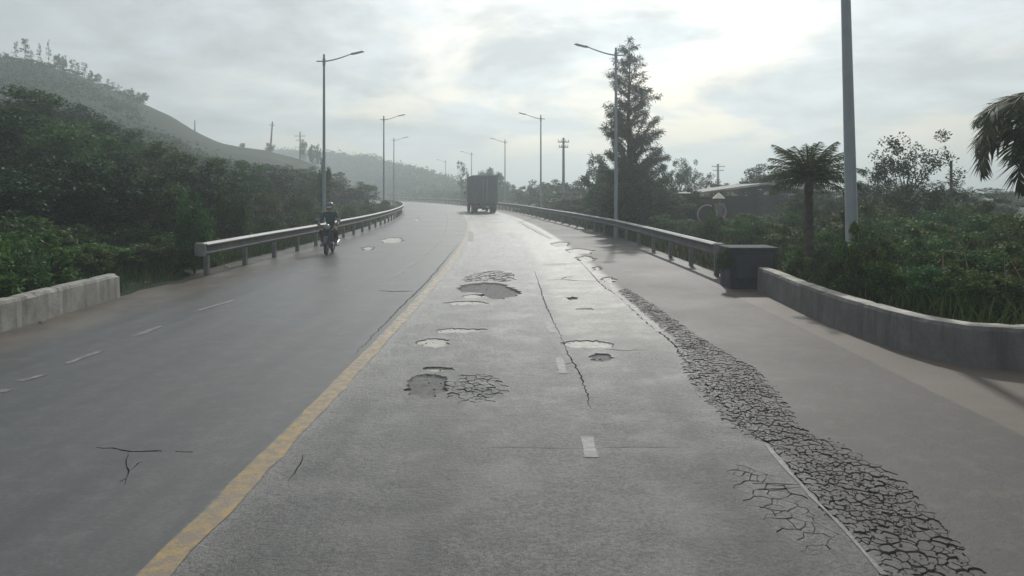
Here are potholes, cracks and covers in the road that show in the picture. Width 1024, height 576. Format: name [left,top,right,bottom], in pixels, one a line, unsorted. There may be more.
crack [96,447,183,483]
crack [463,271,517,282]
crack [554,259,986,576]
pothole [457,282,522,299]
pothole [415,338,449,348]
pothole [403,374,450,398]
pothole [561,340,614,348]
pothole [588,353,613,362]
